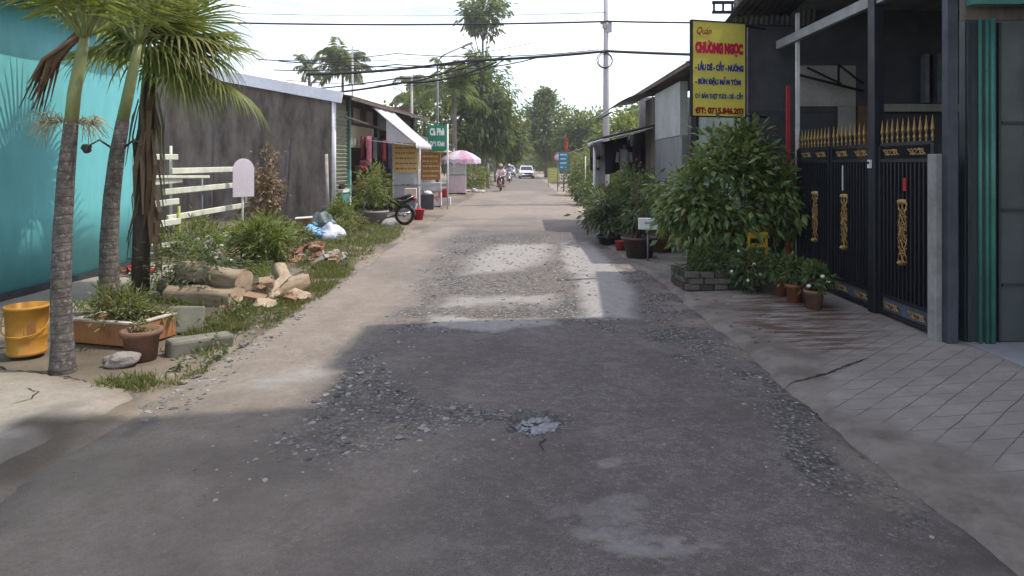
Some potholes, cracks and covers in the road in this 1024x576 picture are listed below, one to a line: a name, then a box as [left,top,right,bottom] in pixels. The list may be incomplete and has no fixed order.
crack [0,366,87,404]
crack [788,358,867,386]
pothole [507,411,566,436]
